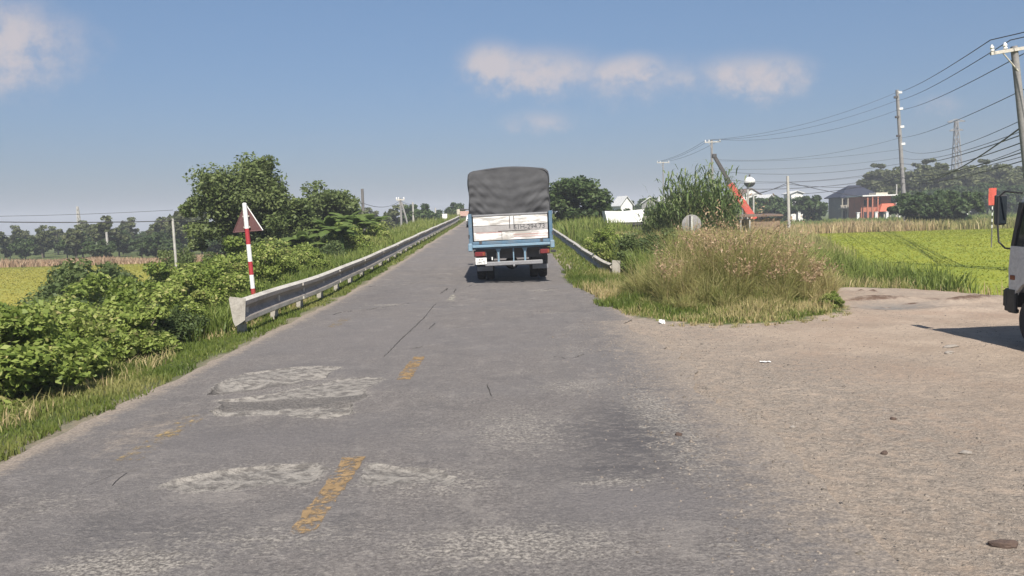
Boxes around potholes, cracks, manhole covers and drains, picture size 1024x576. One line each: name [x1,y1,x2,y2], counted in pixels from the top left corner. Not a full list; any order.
crack [333,278,489,356]
crack [83,465,156,488]
